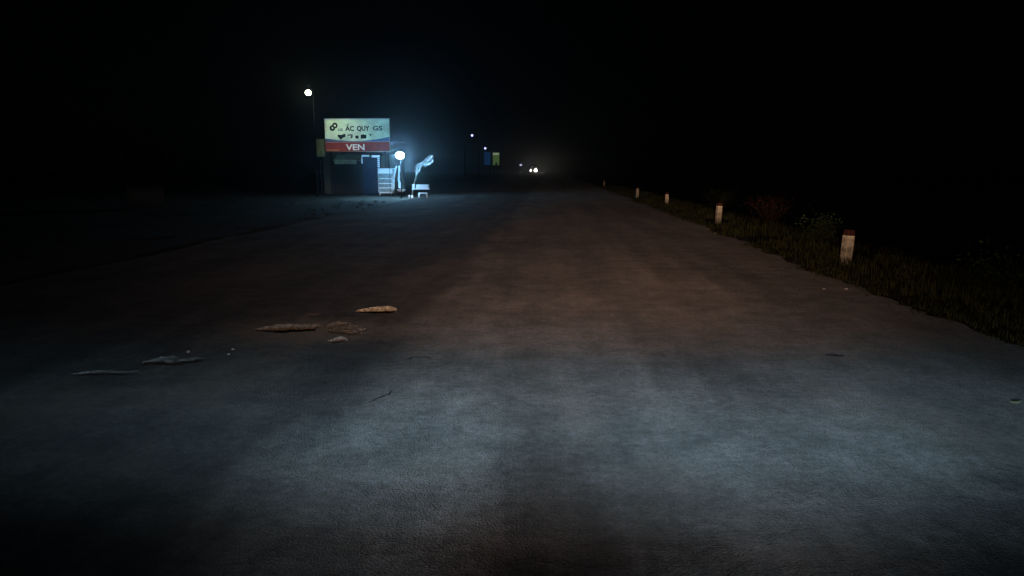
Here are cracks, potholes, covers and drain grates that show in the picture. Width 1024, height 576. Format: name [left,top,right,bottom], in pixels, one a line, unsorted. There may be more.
pothole [254,324,323,334]
pothole [140,355,206,366]
pothole [355,306,398,314]
pothole [323,321,367,336]
